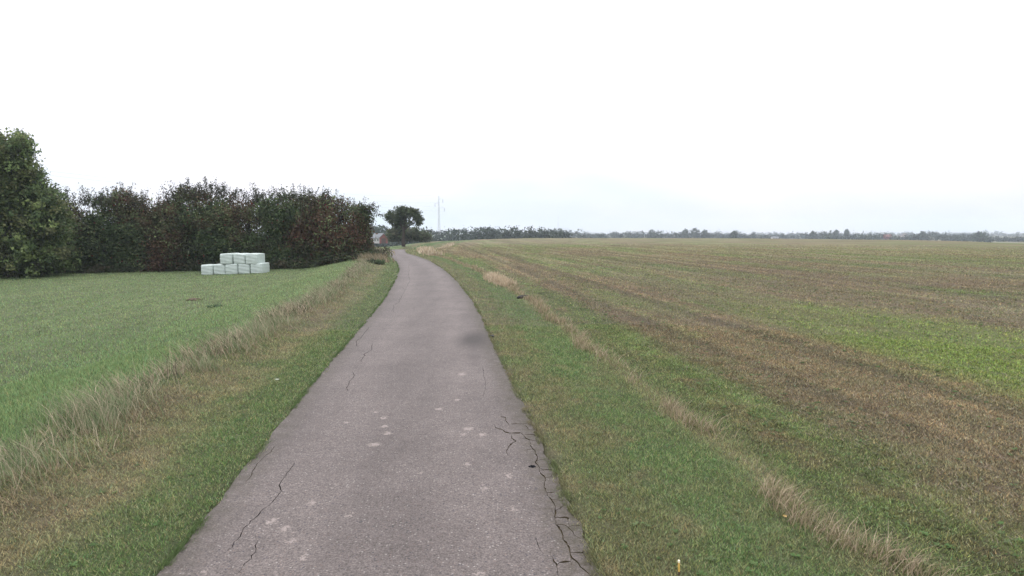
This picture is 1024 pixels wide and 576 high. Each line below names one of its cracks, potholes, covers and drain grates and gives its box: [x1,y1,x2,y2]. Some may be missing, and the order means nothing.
crack [495,417,591,576]
crack [224,462,295,574]
